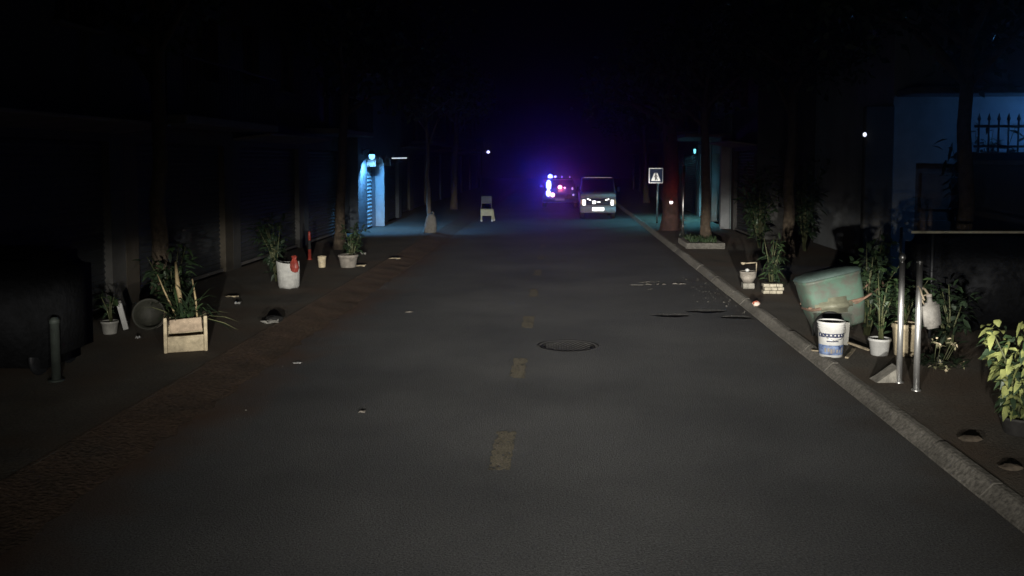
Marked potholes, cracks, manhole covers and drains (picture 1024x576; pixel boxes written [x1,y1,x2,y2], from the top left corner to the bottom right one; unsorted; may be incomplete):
manhole cover [537,340,599,352]
